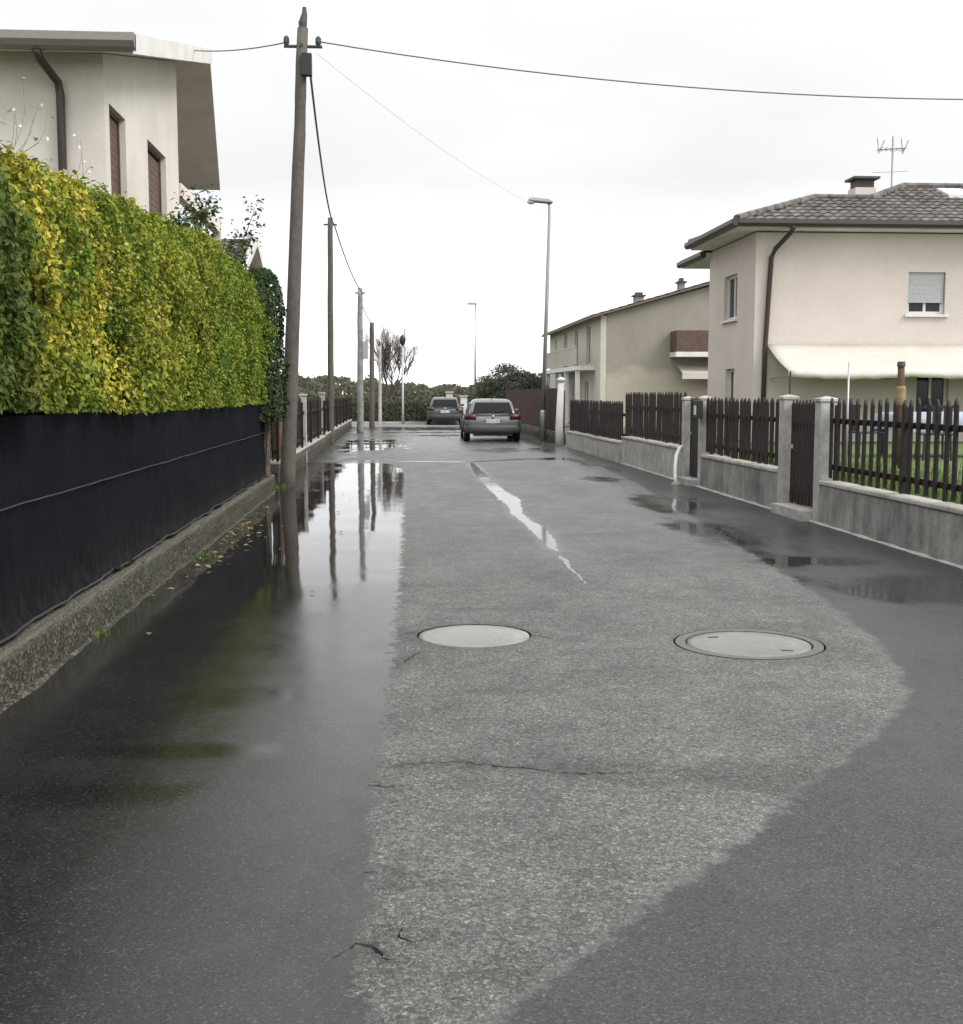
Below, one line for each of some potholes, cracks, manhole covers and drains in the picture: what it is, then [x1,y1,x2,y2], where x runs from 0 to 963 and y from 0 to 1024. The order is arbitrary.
crack [397,761,631,775]
manhole cover [417,625,531,647]
manhole cover [674,629,826,660]
crack [325,929,430,965]
